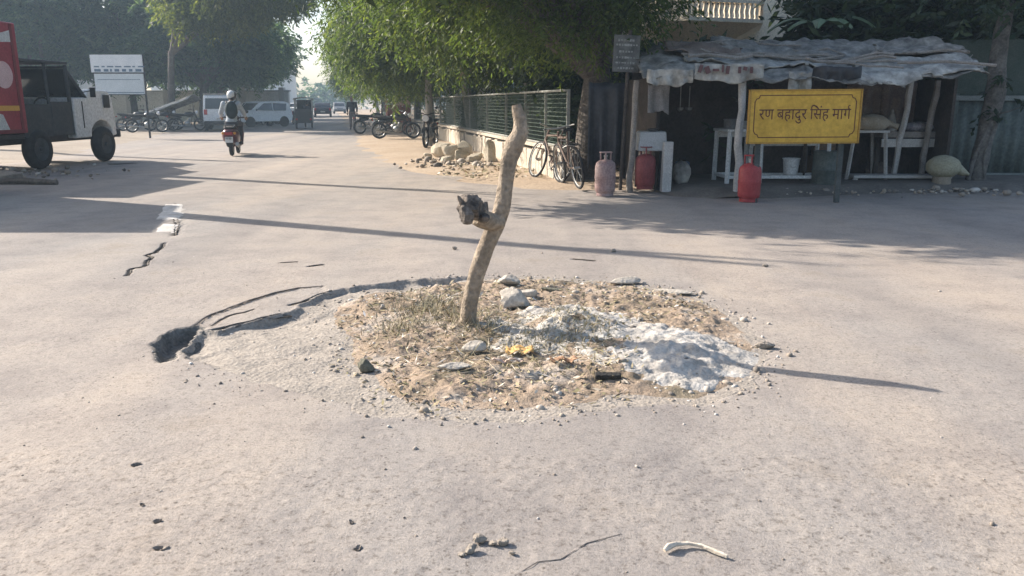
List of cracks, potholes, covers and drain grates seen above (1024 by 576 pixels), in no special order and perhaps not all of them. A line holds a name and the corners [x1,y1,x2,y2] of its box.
crack [126,203,179,276]
crack [194,286,332,332]
pothole [148,325,207,363]
